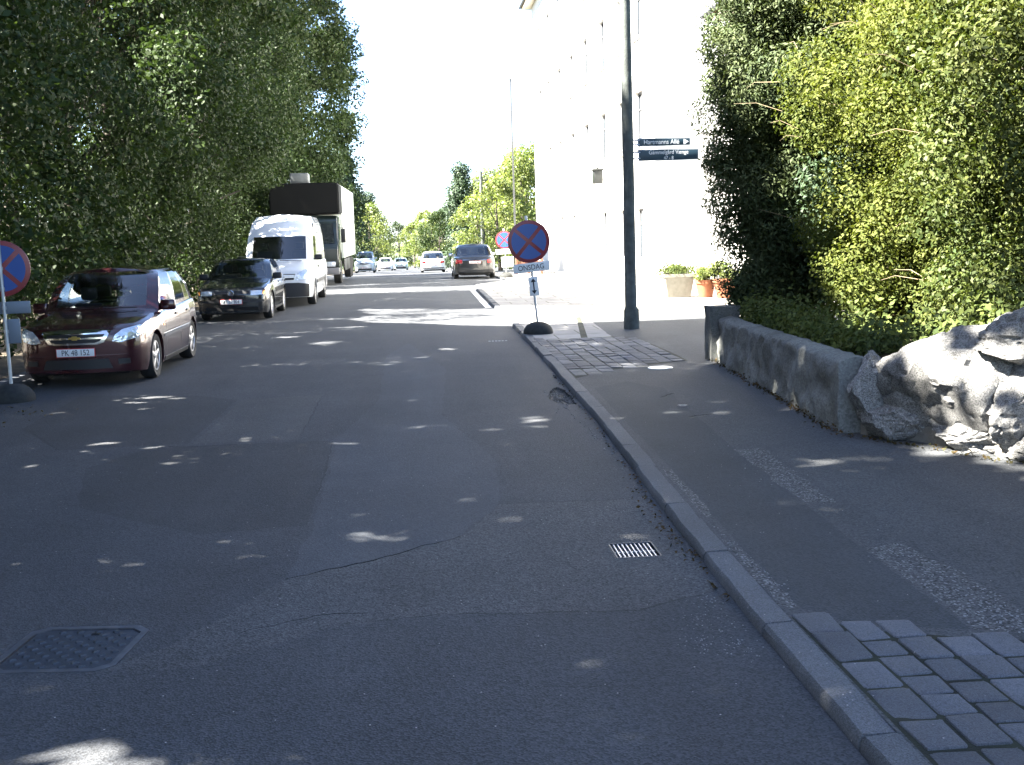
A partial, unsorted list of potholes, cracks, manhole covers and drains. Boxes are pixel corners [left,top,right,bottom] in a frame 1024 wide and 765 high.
crack [287,536,459,579]
drain grate [608,541,662,559]
manhole cover [0,625,150,674]
pothole [548,387,576,405]
